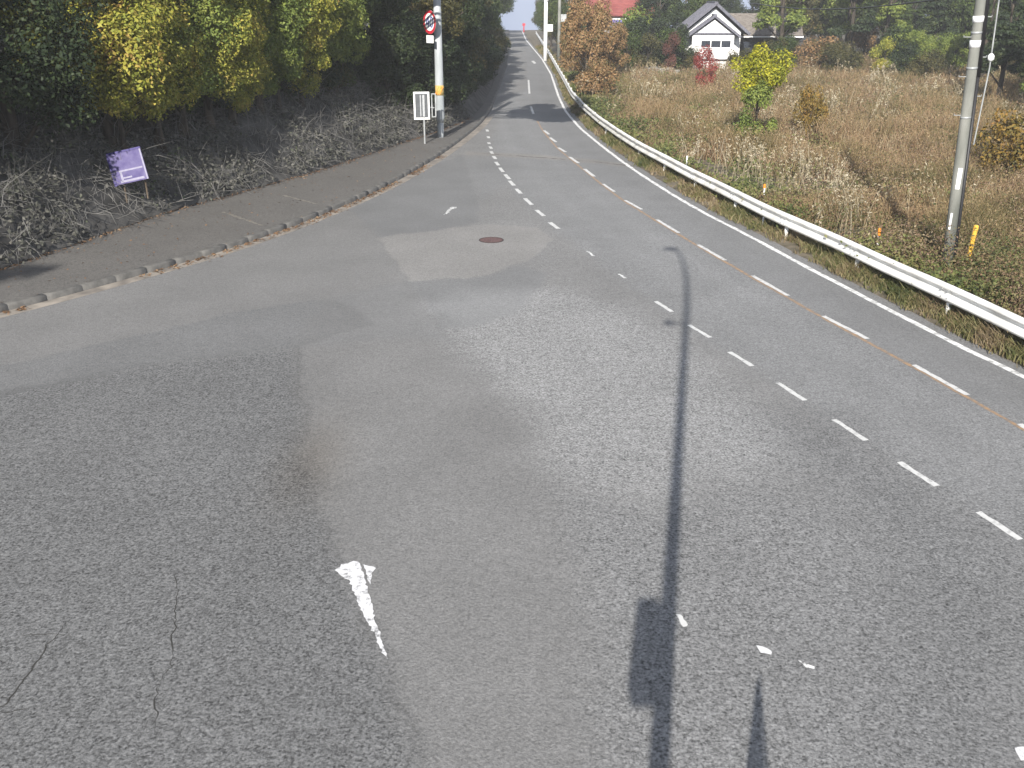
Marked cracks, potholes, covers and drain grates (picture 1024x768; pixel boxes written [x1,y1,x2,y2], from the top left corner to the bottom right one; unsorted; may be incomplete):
crack [0,622,68,713]
crack [153,575,179,740]
